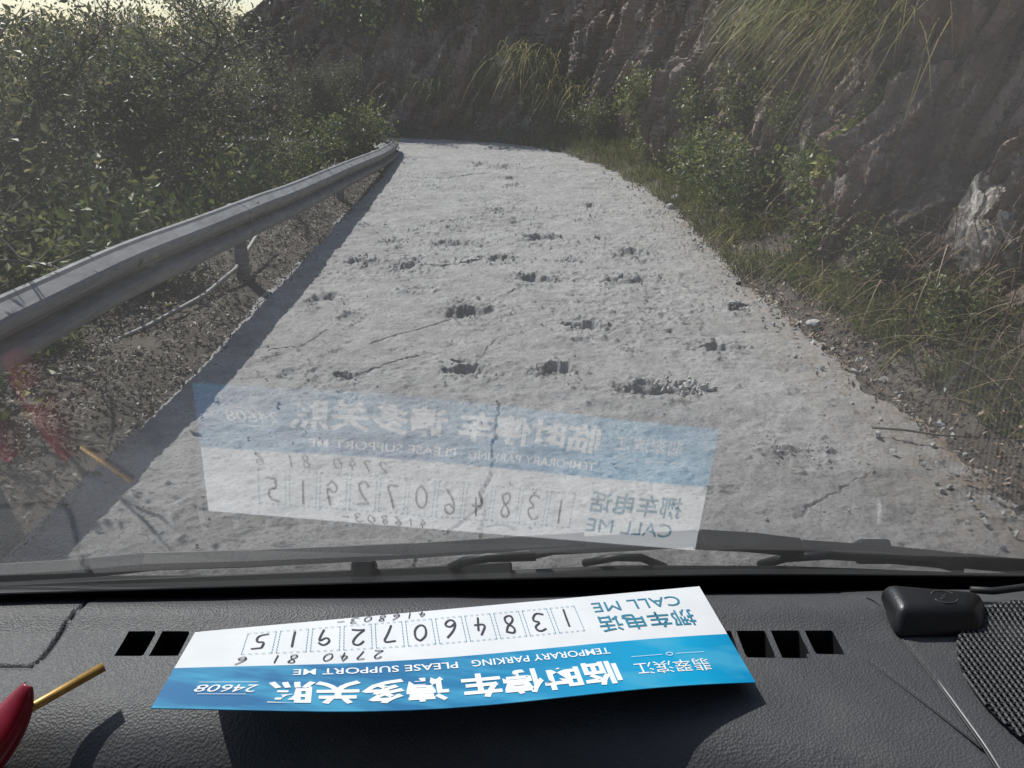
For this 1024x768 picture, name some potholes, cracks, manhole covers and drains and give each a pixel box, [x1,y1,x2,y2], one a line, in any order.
crack [355,319,452,374]
pothole [525,357,582,379]
pothole [340,253,369,266]
pothole [362,256,386,268]
crack [792,472,872,519]
pothole [327,370,368,382]
pothole [500,271,562,286]
pothole [438,298,503,322]
pothole [477,253,521,266]
pothole [435,358,495,379]
pothole [559,314,611,343]
pothole [515,232,570,243]
